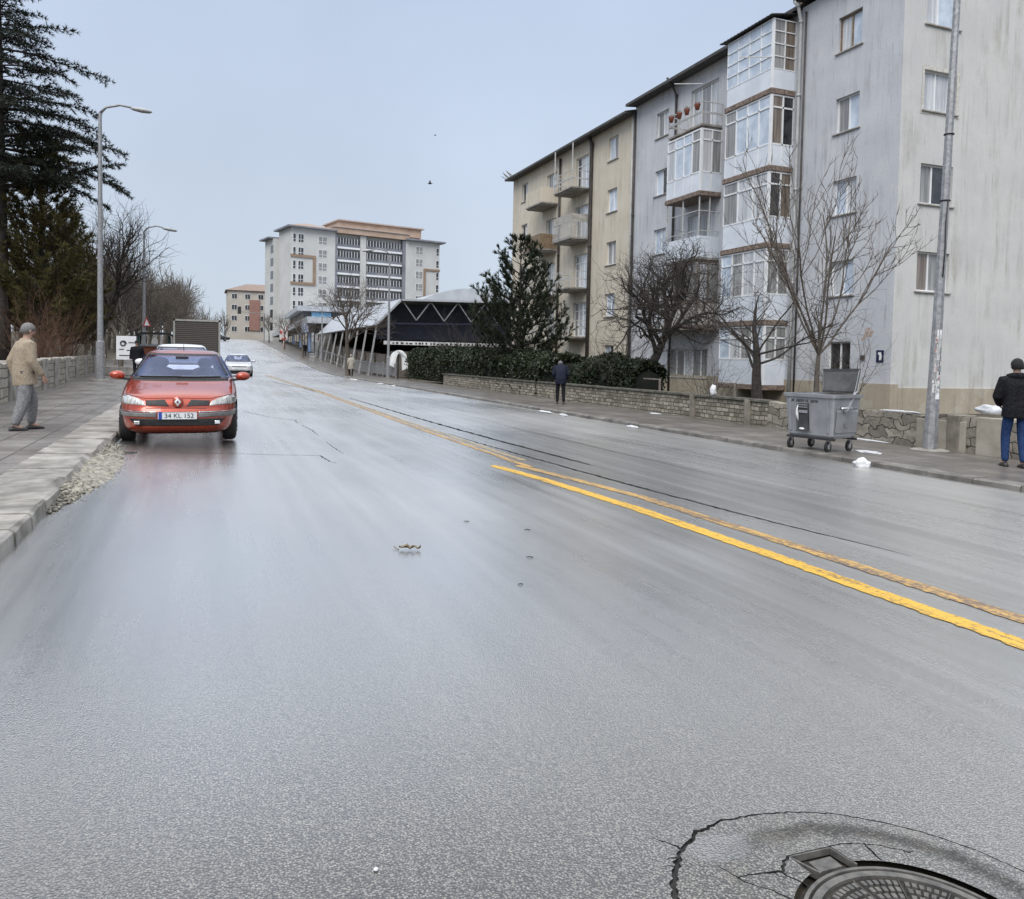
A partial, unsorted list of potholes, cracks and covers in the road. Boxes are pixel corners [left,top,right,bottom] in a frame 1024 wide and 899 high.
crack [652,811,1024,899]
manhole cover [788,847,986,899]
crack [208,411,342,463]
